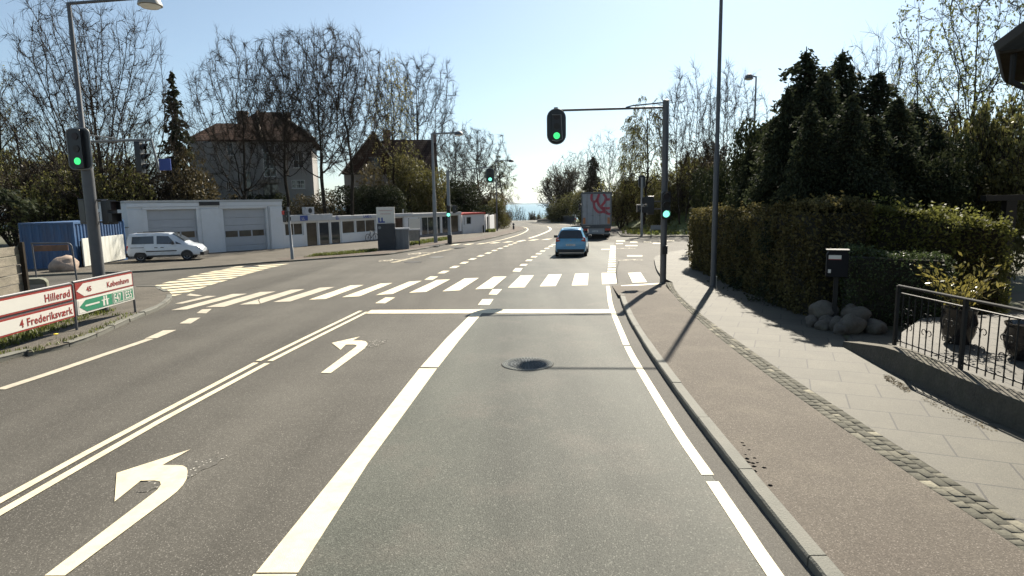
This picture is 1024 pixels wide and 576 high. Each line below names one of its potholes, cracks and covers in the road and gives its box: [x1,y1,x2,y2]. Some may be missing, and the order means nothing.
manhole cover [501,357,554,371]
